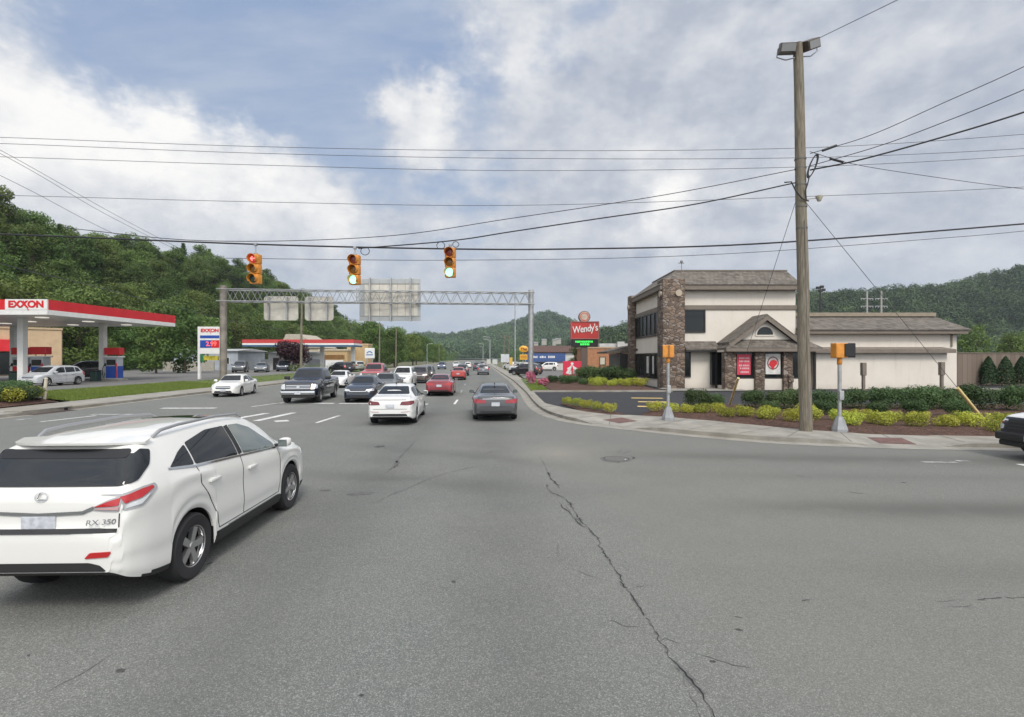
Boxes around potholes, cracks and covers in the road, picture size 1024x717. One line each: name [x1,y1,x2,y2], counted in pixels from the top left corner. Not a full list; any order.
crack [541,458,750,717]
crack [938,597,1024,611]
crack [377,441,492,502]
